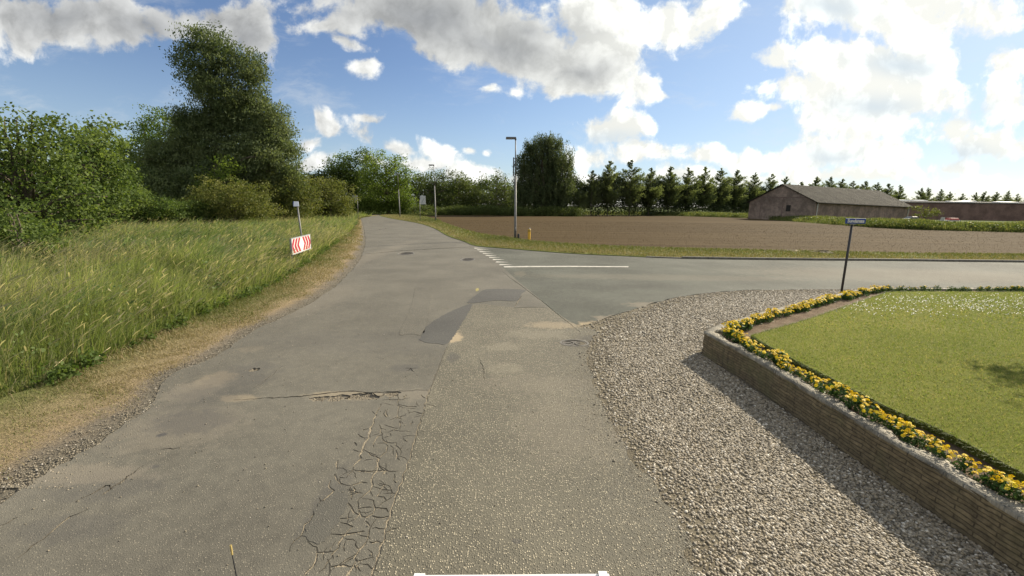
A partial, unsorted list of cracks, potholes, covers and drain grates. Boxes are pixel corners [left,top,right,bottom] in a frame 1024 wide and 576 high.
manhole cover [560,339,589,347]
crack [244,366,436,576]
crack [0,466,142,558]
